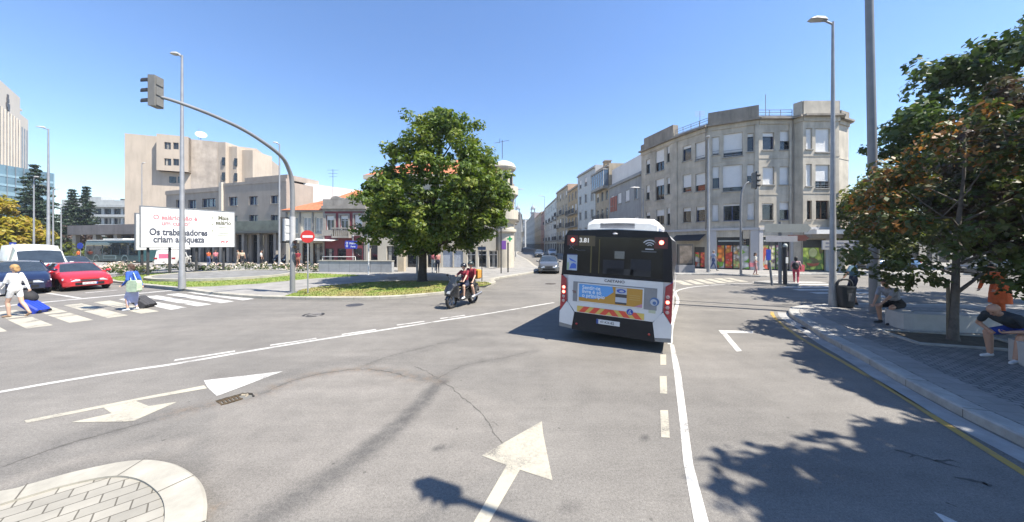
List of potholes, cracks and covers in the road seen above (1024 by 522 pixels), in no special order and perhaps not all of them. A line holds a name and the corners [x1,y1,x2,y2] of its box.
crack [896,450,993,486]
crack [442,381,503,444]
